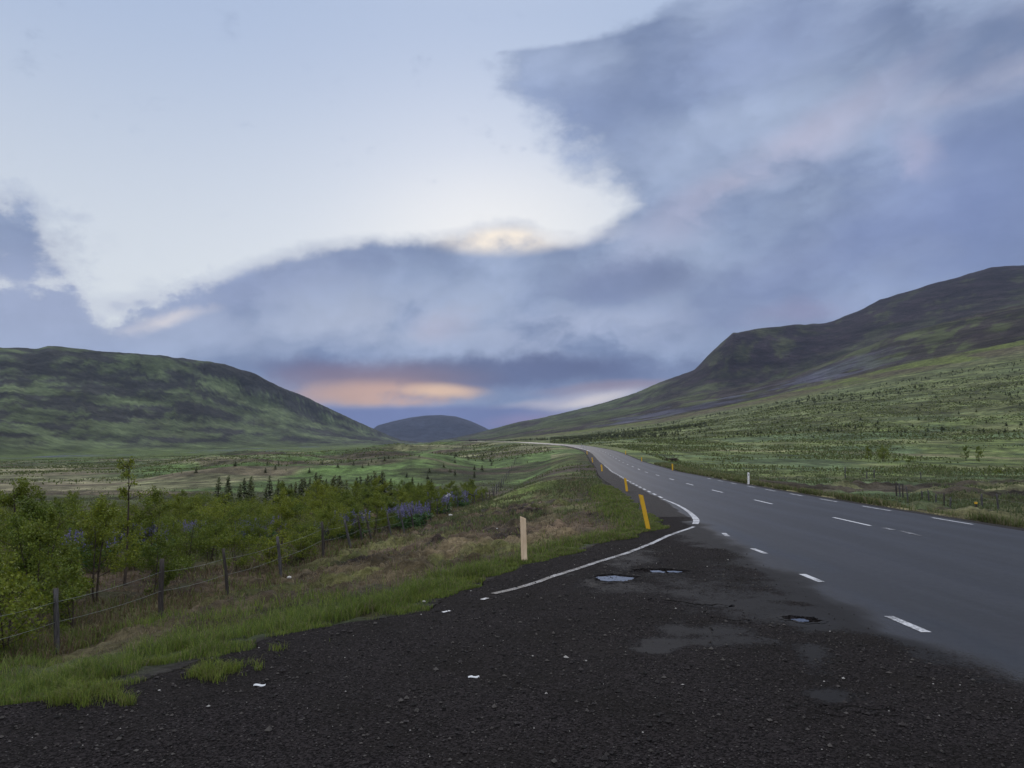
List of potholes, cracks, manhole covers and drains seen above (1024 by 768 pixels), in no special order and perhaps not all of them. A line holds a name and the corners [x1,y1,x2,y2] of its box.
pothole [775,614,828,624]
pothole [588,572,647,583]
